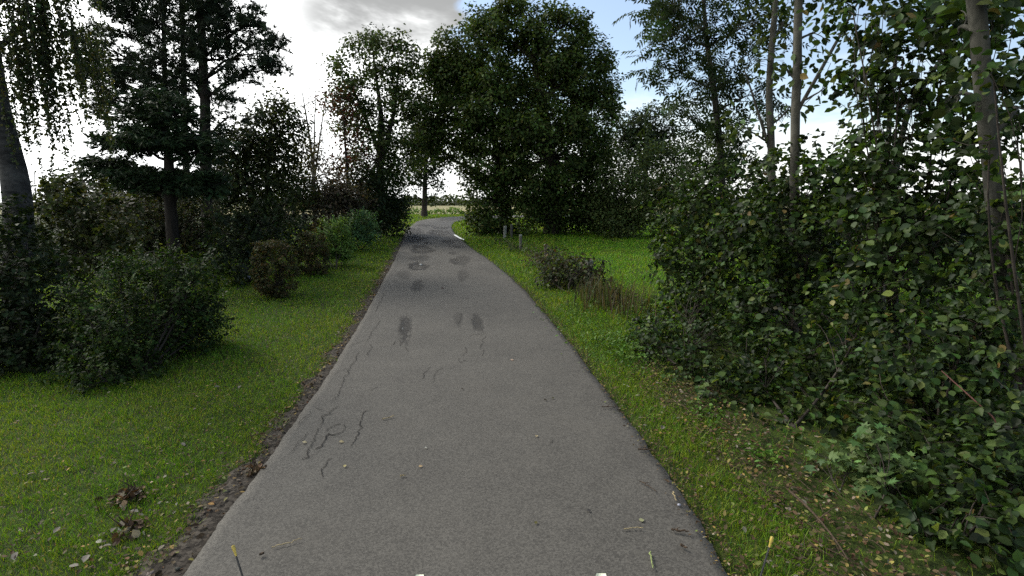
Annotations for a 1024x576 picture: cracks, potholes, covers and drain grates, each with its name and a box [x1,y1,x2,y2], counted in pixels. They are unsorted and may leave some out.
crack [290,301,380,477]
pothole [398,318,411,344]
